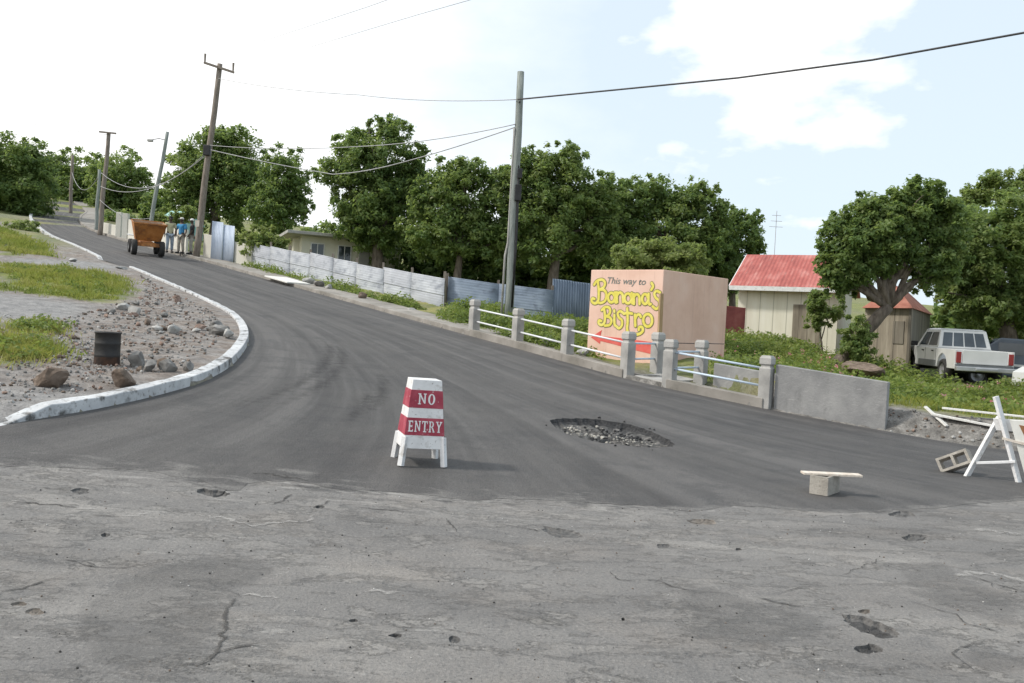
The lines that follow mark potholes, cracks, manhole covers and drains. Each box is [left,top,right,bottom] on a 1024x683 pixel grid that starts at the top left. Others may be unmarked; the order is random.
pothole [545,416,675,450]
crack [919,603,995,673]
pothole [197,488,231,497]
crack [165,598,257,668]
pothole [541,526,583,538]
pothole [854,643,883,654]
pothole [842,614,899,639]
